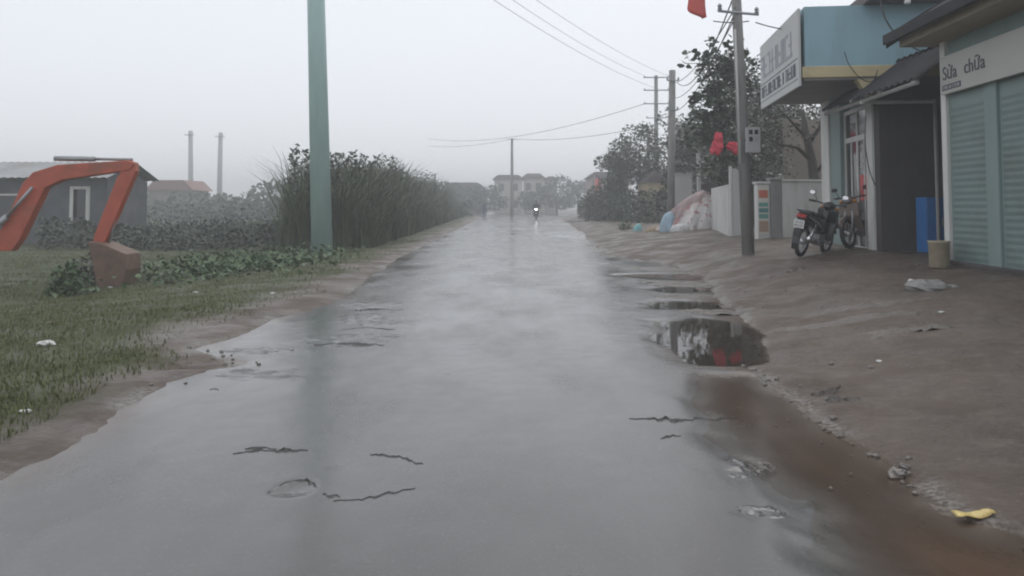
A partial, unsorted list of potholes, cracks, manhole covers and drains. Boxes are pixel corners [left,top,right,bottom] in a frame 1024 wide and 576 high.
pothole [737,505,787,519]
crack [233,446,308,454]
pothole [721,458,776,480]
crack [629,416,739,439]
crack [308,308,402,346]
crack [370,453,423,464]
crack [268,478,415,501]
pothole [267,480,318,497]
